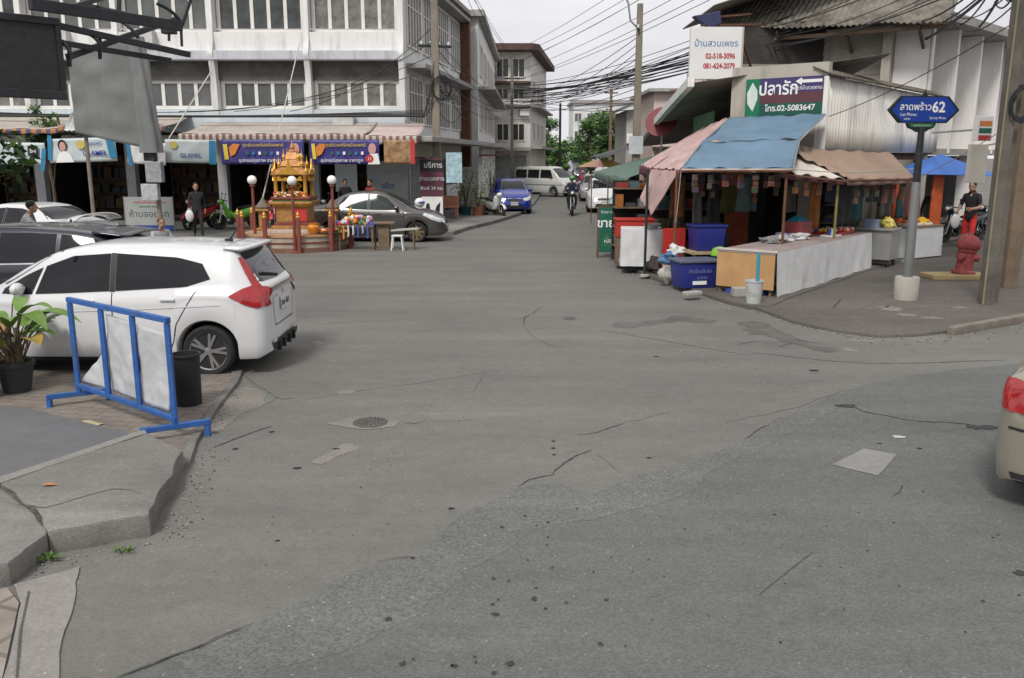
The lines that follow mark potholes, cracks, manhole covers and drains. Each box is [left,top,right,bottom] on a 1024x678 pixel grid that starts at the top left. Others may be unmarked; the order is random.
crack [213,374,291,448]
crack [8,489,133,508]
crack [519,412,667,486]
crack [727,389,977,440]
manhole cover [326,416,400,429]
